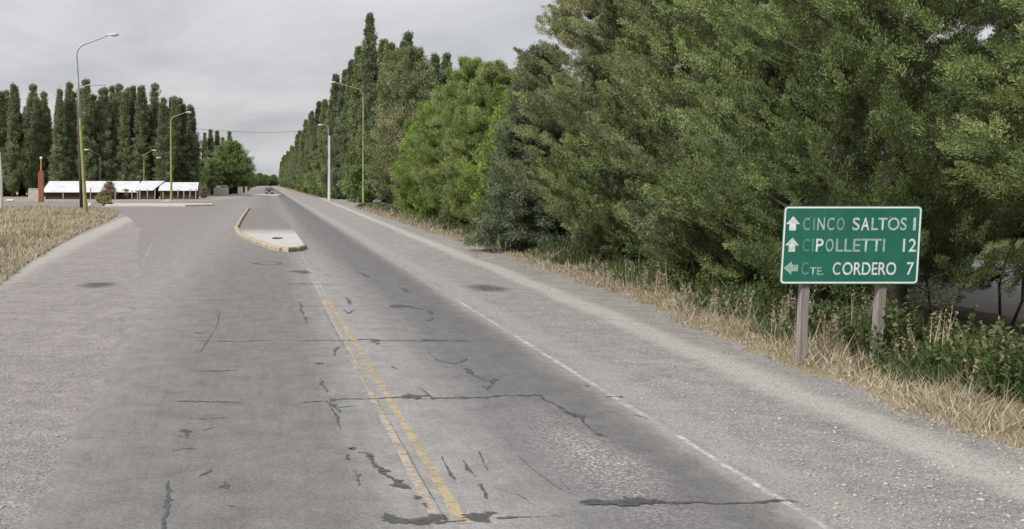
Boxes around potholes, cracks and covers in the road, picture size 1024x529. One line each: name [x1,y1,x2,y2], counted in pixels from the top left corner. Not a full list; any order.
crack [161,480,174,529]
